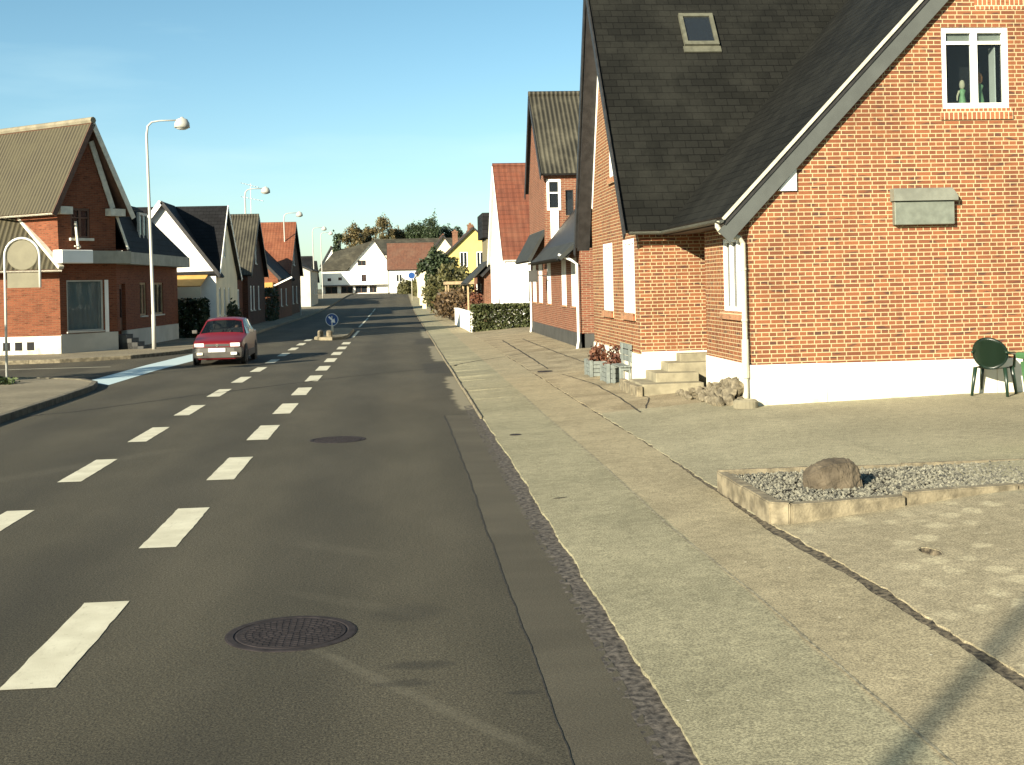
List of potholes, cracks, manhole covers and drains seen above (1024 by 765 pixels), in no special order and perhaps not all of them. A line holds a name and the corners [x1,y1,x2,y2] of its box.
manhole cover [224,616,357,652]
pothole [919,546,944,556]
